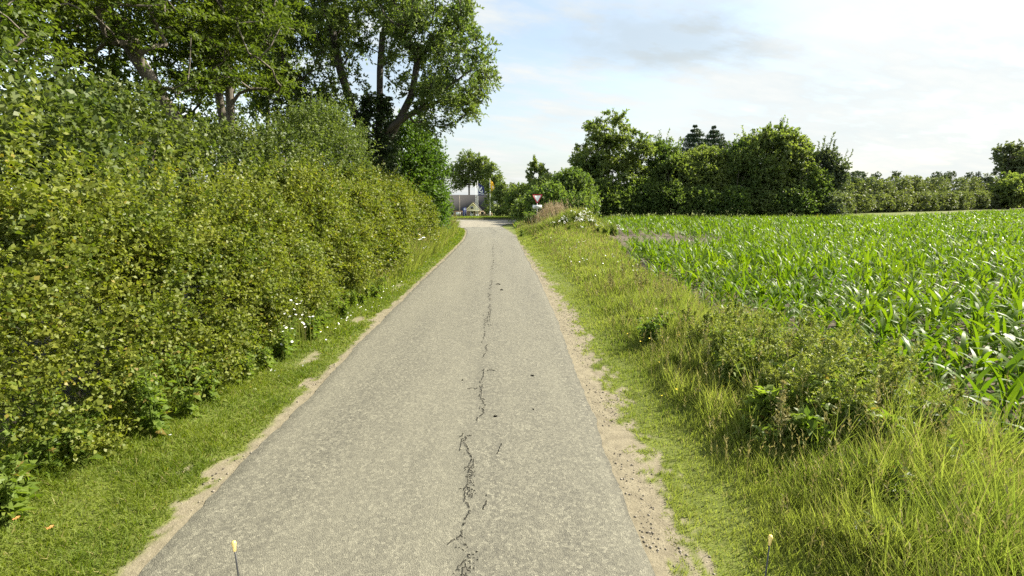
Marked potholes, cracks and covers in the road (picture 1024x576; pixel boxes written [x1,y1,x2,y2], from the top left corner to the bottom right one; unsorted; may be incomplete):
crack [444,242,503,576]
